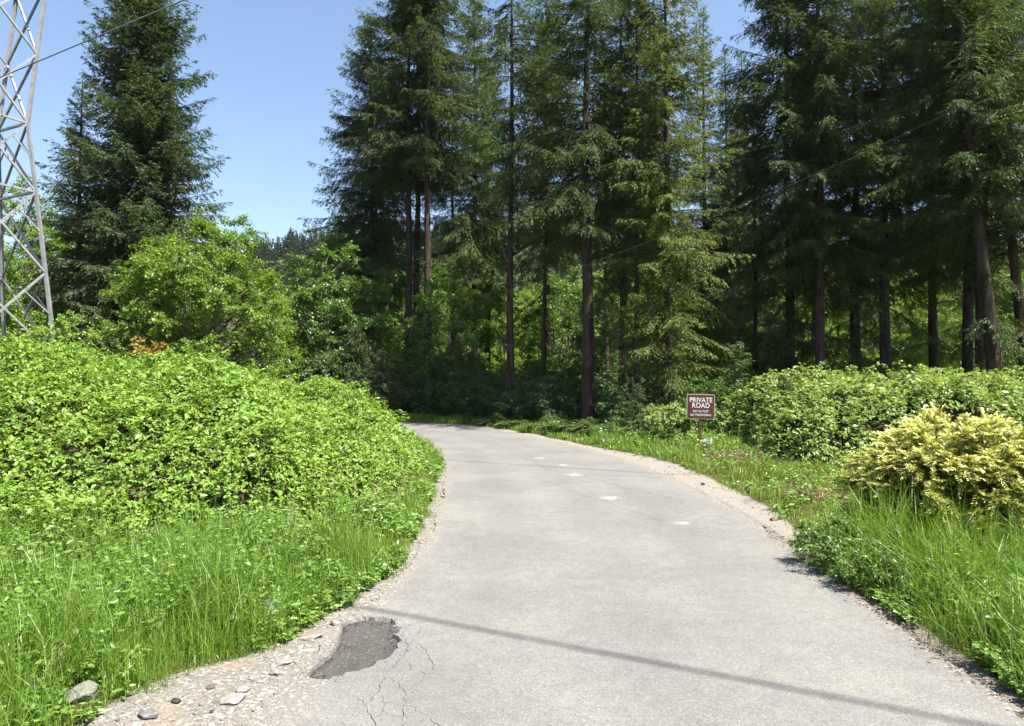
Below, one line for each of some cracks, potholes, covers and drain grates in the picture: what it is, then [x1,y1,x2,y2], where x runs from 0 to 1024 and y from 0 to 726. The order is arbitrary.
pothole [297,612,418,689]
crack [349,622,439,726]
